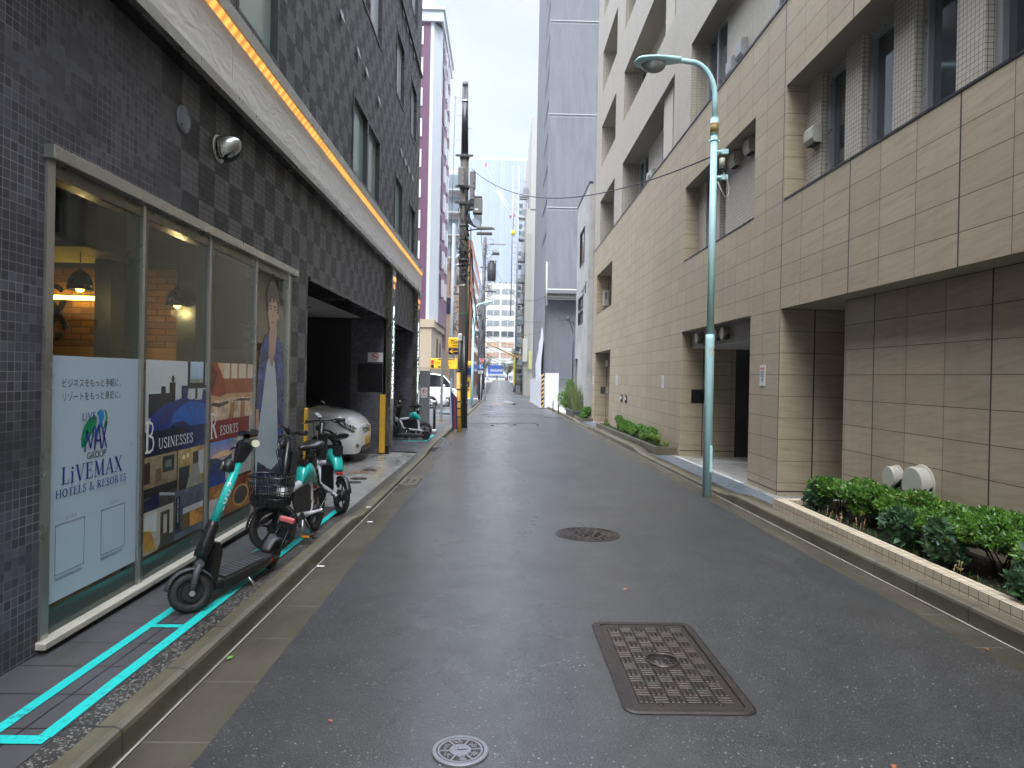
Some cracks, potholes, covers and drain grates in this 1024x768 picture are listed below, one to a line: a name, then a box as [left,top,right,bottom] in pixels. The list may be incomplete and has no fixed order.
utility cover [432,735,489,768]
manhole cover [555,527,621,542]
manhole cover [592,622,756,716]
